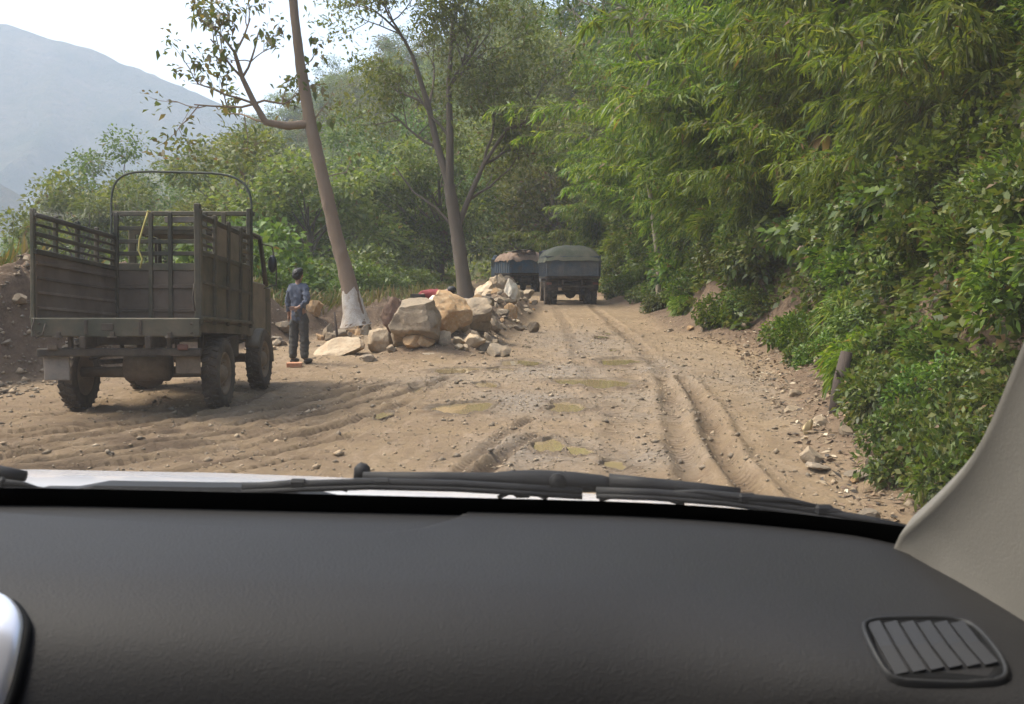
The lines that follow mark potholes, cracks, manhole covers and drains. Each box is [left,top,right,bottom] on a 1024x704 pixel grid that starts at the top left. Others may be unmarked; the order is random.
pothole [564,443,597,456]
pothole [422,399,500,415]
pothole [596,457,633,472]
pothole [544,377,645,389]
pothole [528,435,568,453]
pothole [596,356,651,366]
pothole [542,398,597,414]
pothole [372,409,395,421]
